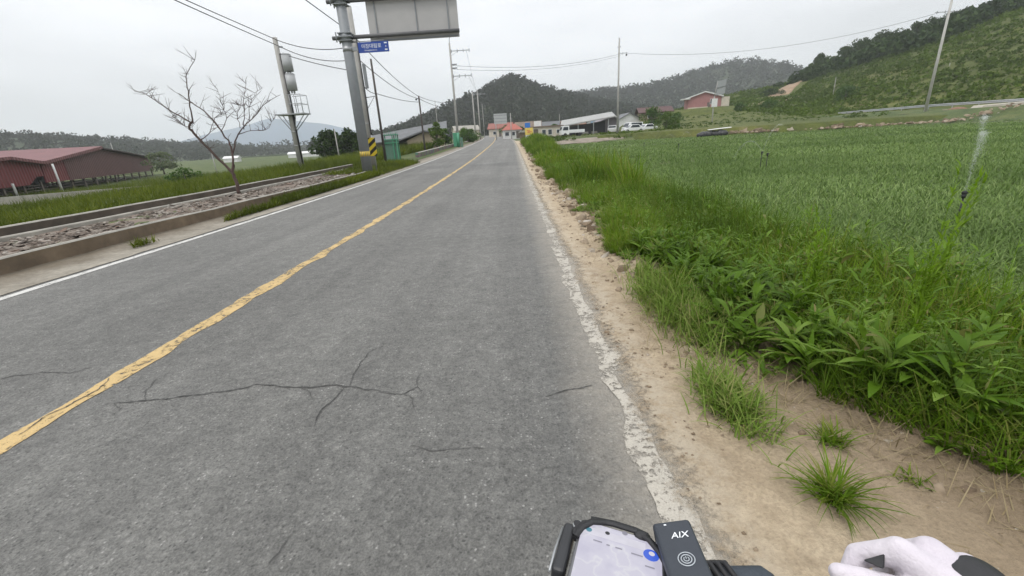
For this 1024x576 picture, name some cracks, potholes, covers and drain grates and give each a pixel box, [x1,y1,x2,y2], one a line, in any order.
crack [4,346,422,435]
